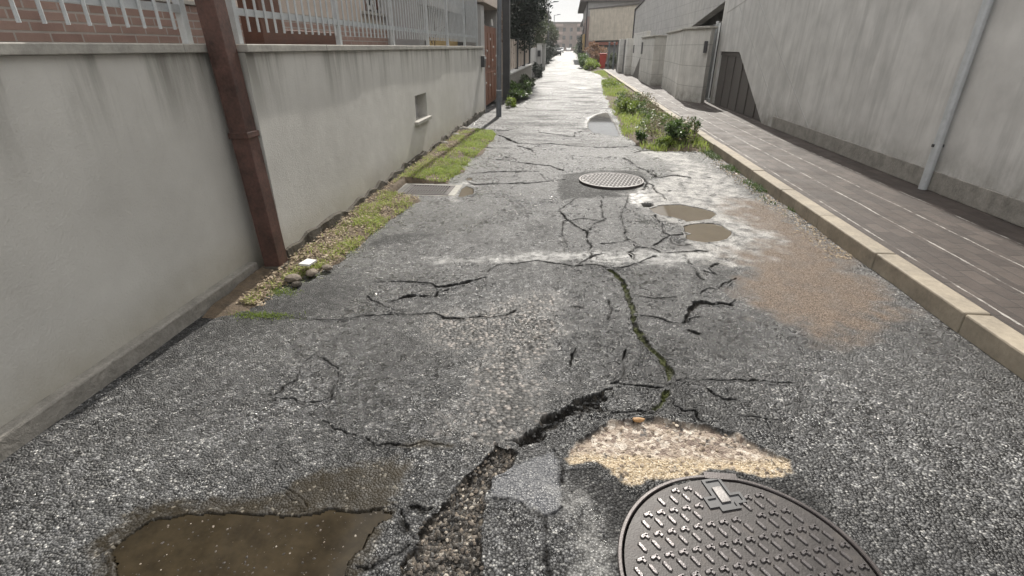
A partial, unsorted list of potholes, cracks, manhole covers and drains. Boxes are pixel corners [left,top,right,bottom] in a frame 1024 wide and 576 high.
manhole cover [617,471,884,576]
pothole [648,204,718,222]
pothole [681,222,735,244]
pothole [395,439,523,576]
pothole [100,504,401,576]
crack [265,351,457,451]
manhole cover [579,172,644,190]
pothole [585,112,623,137]
crack [256,128,795,425]
drain grate [396,183,463,196]
